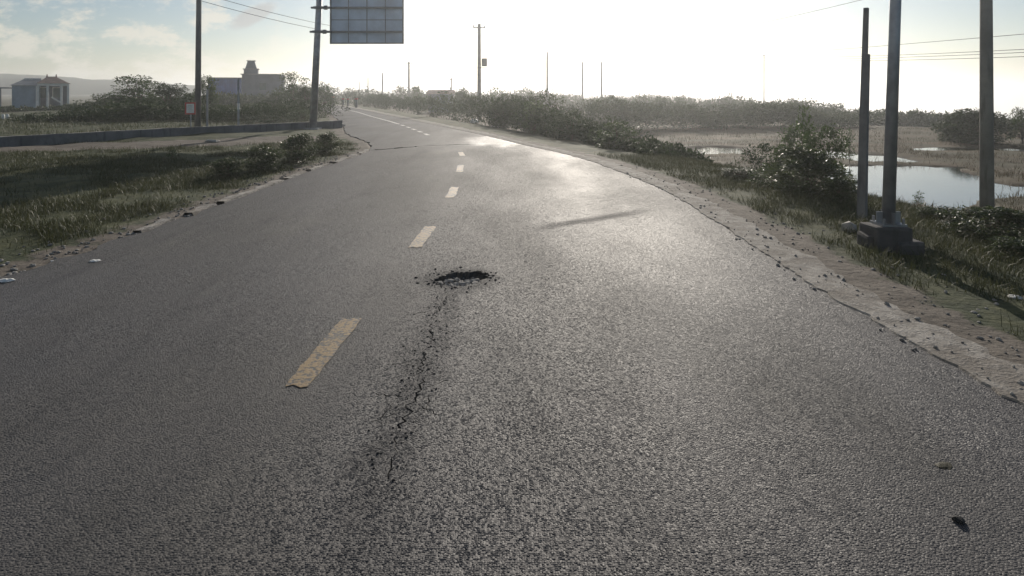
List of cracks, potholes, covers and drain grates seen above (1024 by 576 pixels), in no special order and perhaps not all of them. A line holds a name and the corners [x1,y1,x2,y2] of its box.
crack [371,296,452,479]
pothole [432,271,492,287]
